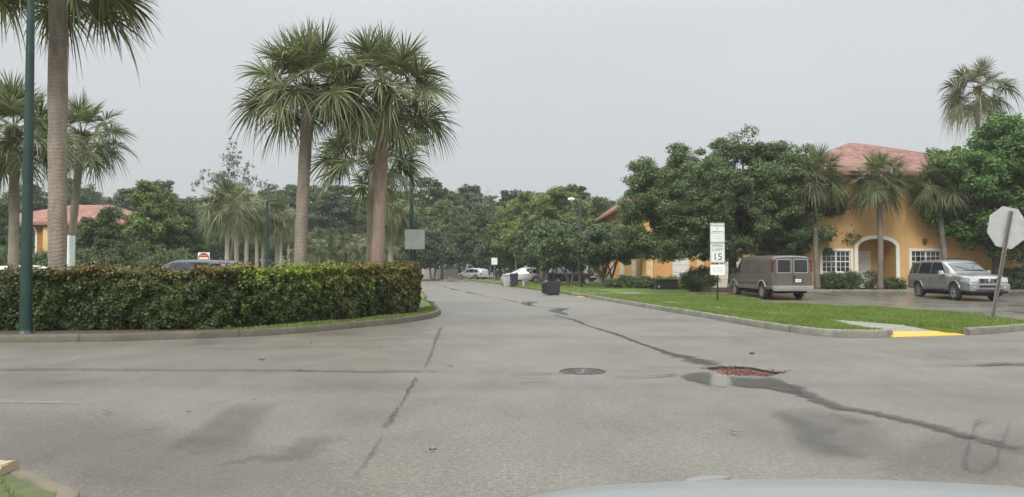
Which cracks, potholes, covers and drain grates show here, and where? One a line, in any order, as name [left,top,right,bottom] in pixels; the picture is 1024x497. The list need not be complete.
crack [778,369,1014,447]
crack [554,314,710,367]
pothole [701,364,786,377]
